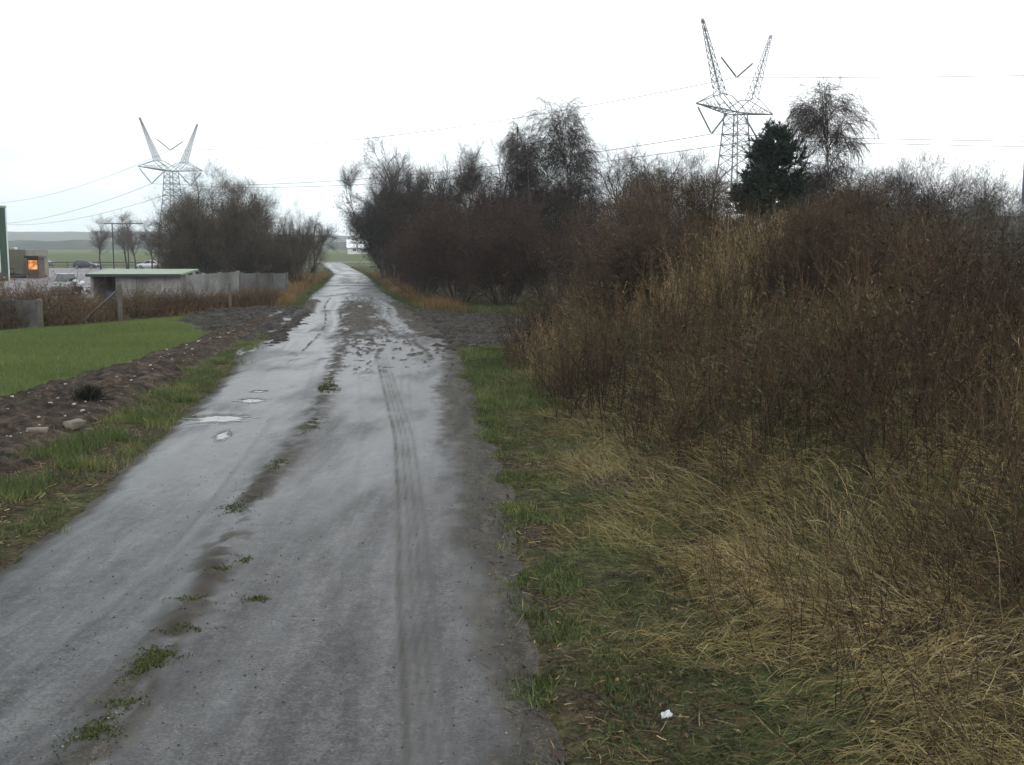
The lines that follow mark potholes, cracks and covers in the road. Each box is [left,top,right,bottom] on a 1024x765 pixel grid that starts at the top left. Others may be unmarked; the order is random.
pothole [231,397,272,405]
pothole [211,429,232,443]
pothole [179,412,263,426]
